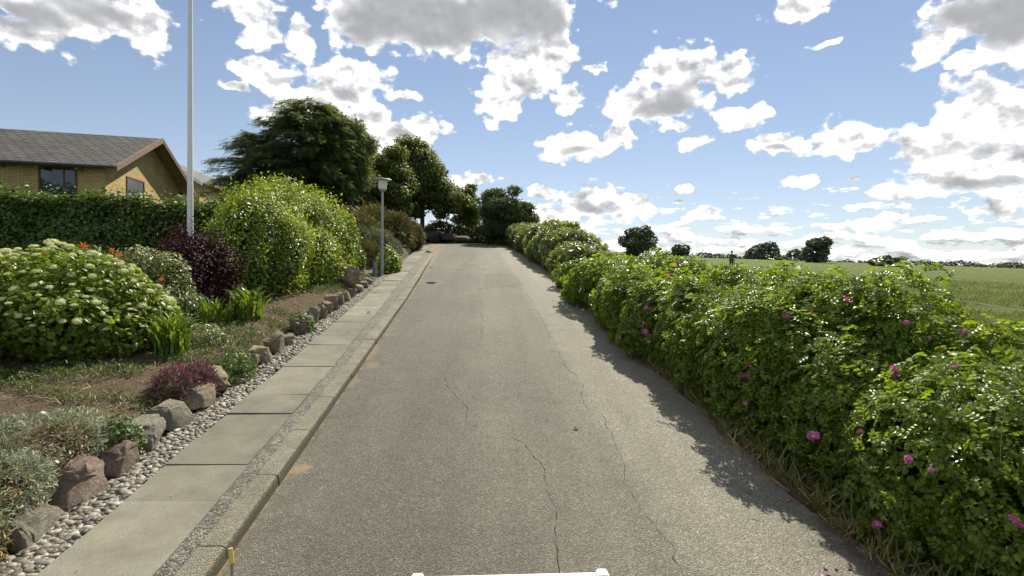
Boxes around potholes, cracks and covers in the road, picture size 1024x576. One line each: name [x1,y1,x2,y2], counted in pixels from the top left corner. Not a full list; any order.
crack [430,267,570,573]
